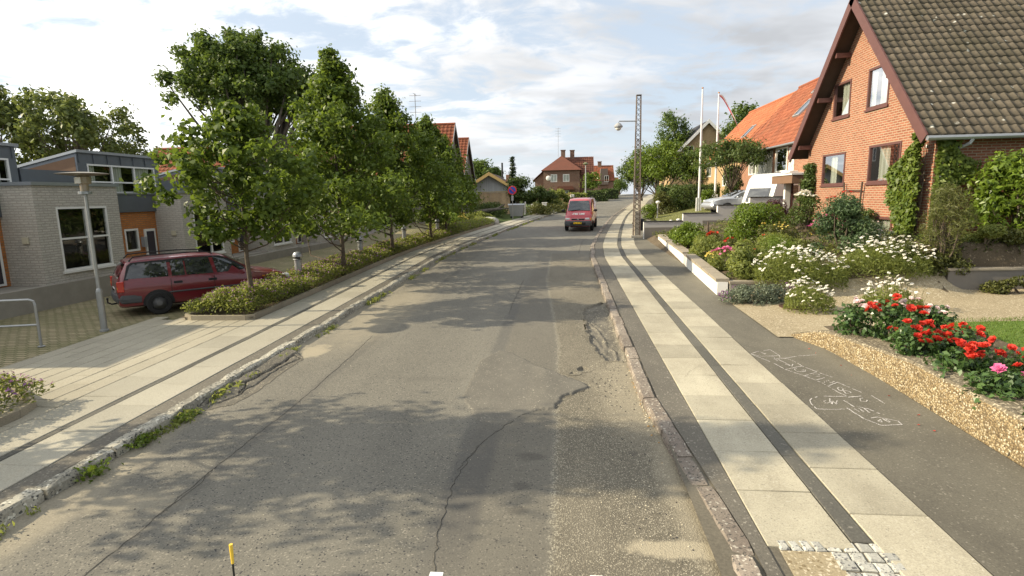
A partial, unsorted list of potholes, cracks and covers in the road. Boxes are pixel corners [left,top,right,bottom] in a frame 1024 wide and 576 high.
pothole [580,301,627,362]
crack [433,413,527,572]
